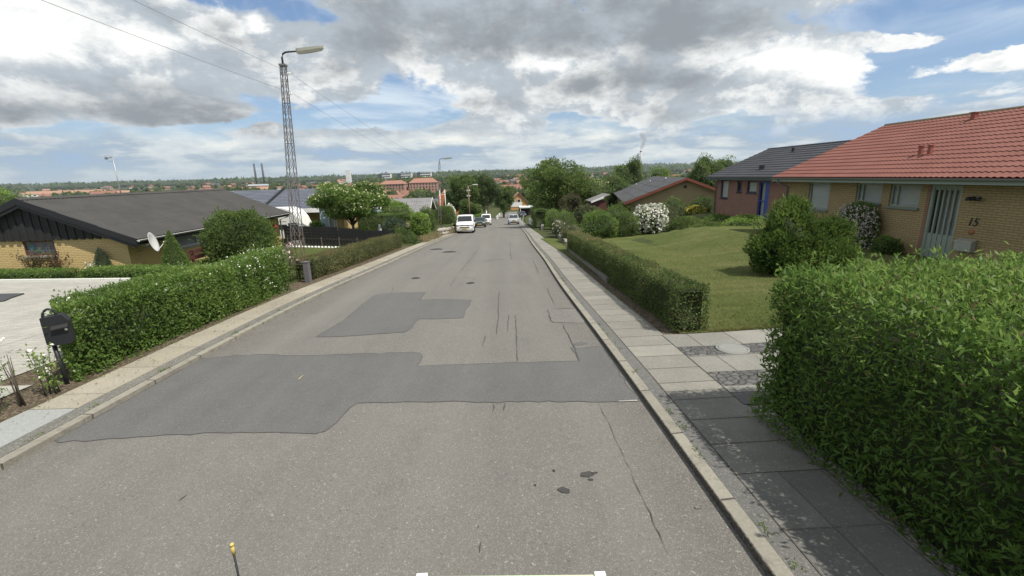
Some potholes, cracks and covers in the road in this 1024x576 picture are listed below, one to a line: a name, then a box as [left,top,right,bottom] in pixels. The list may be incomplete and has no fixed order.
manhole cover [715,342,750,354]
crack [482,295,518,361]
crack [601,409,668,553]
crack [498,249,579,359]
